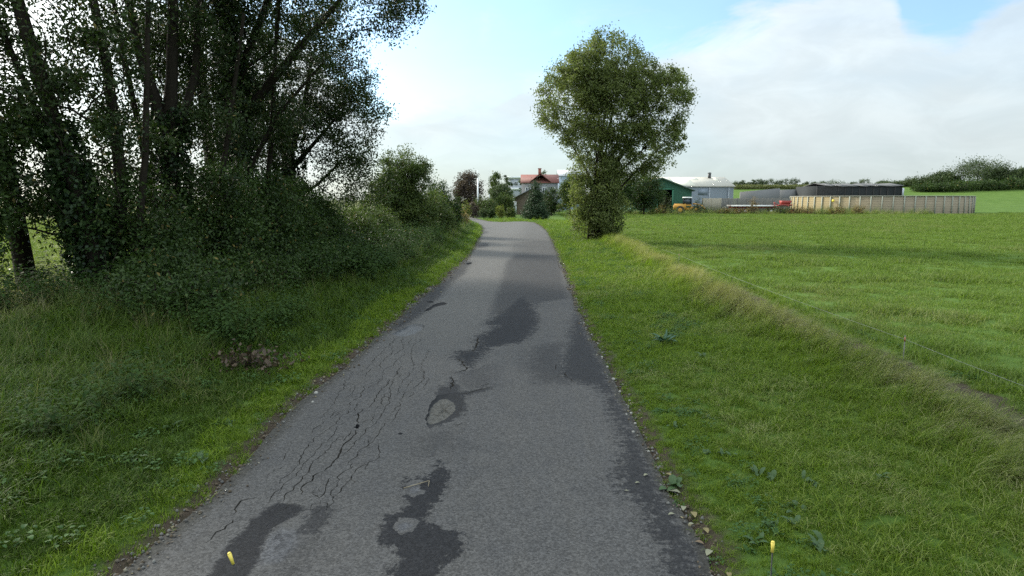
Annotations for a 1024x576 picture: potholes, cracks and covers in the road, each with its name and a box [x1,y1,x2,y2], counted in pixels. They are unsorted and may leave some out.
pothole [425,392,464,426]
crack [206,338,428,543]
